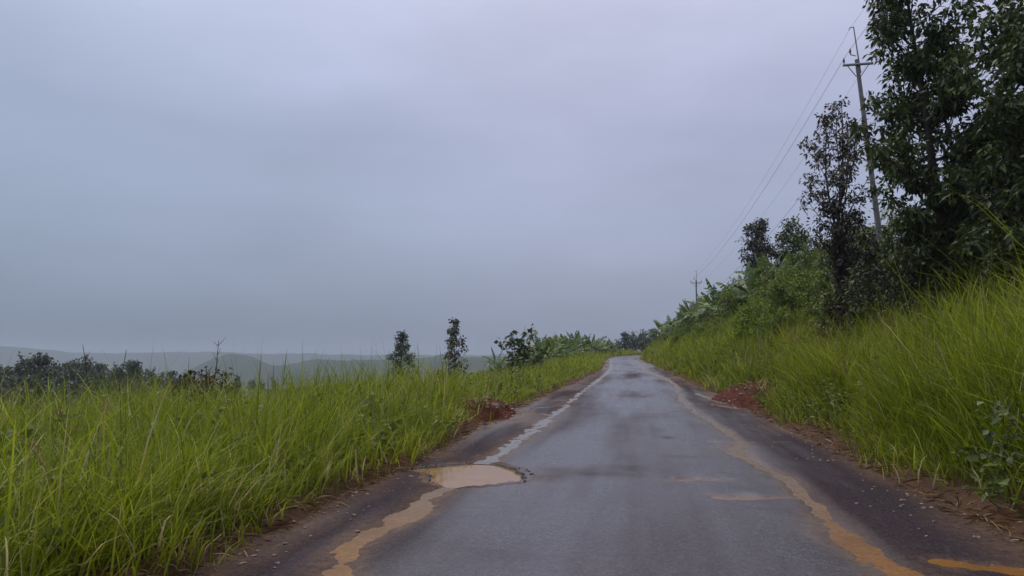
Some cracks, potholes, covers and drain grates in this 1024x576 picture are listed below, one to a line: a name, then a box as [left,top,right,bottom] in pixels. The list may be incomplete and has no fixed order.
pothole [400,461,535,490]
